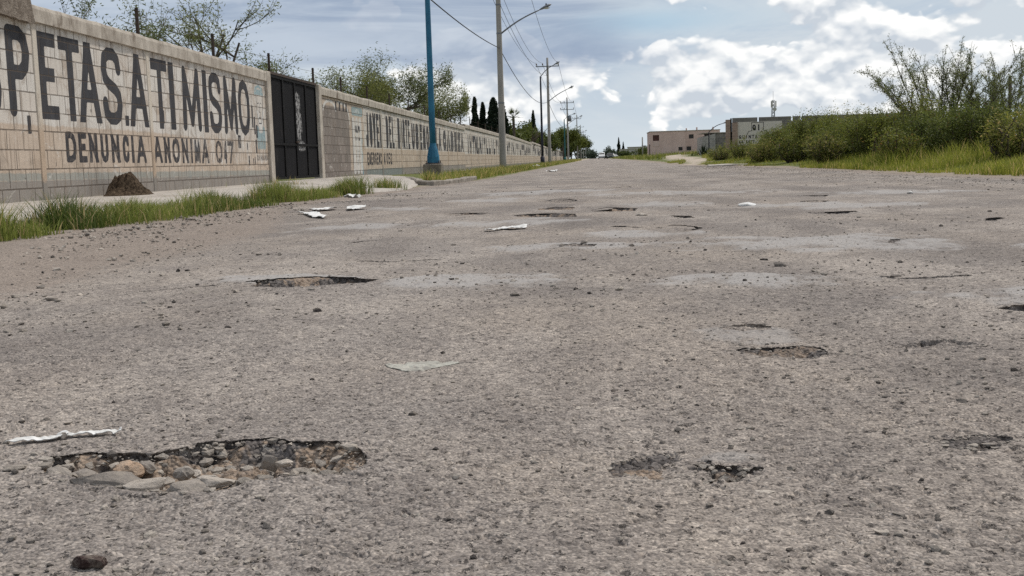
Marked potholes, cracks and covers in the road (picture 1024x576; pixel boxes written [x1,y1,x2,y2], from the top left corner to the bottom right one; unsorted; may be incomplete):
pothole [217,275,386,290]
pothole [588,449,712,485]
pothole [543,242,612,250]
pothole [722,341,841,362]
pothole [24,435,382,499]
pothole [659,457,786,488]
pothole [983,302,1024,314]
pothole [917,429,1024,456]
pothole [882,337,991,355]
